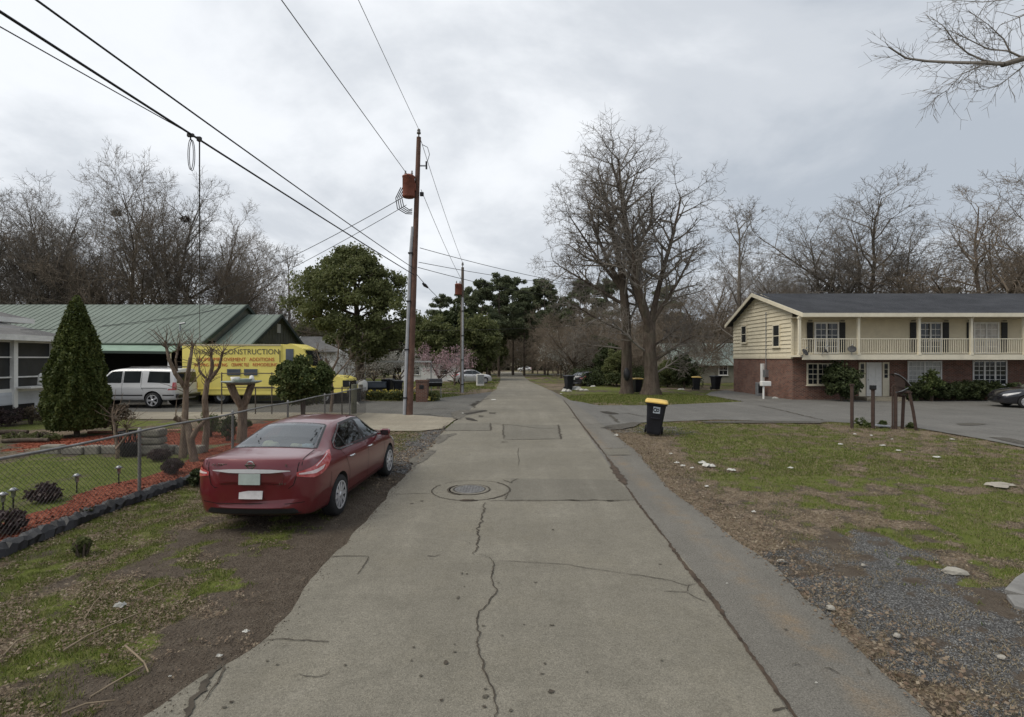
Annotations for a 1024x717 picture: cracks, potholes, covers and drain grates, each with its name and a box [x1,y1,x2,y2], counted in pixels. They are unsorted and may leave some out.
crack [184,662,226,717]
manhole cover [450,484,489,494]
crack [415,398,725,717]
